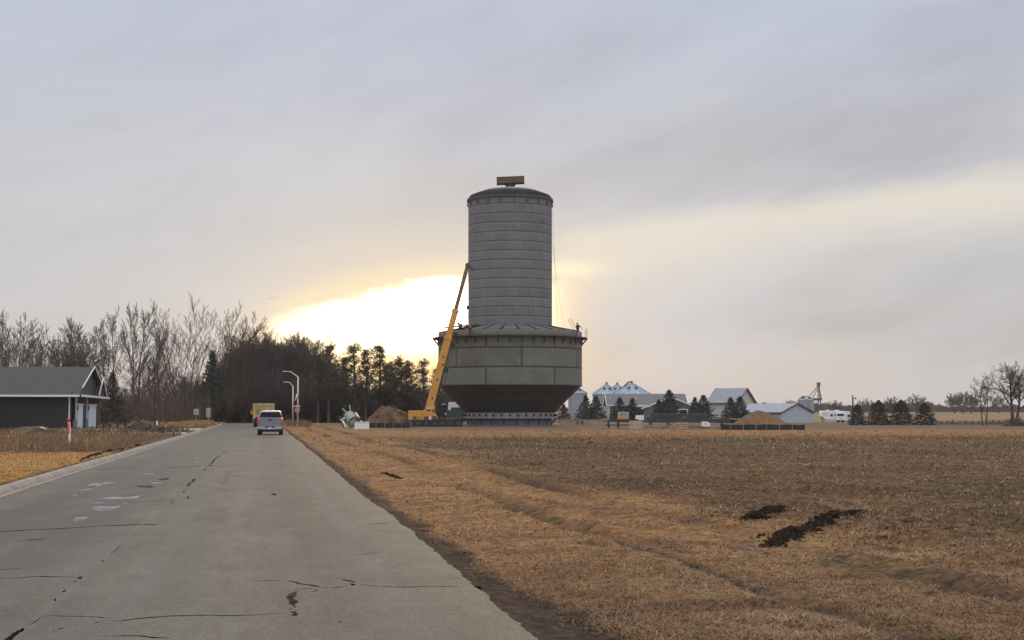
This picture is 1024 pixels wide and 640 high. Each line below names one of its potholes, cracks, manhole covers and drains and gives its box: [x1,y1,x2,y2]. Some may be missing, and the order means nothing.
crack [263,579,481,592]
crack [39,613,280,638]
crack [2,524,155,541]
pothole [287,591,298,608]
